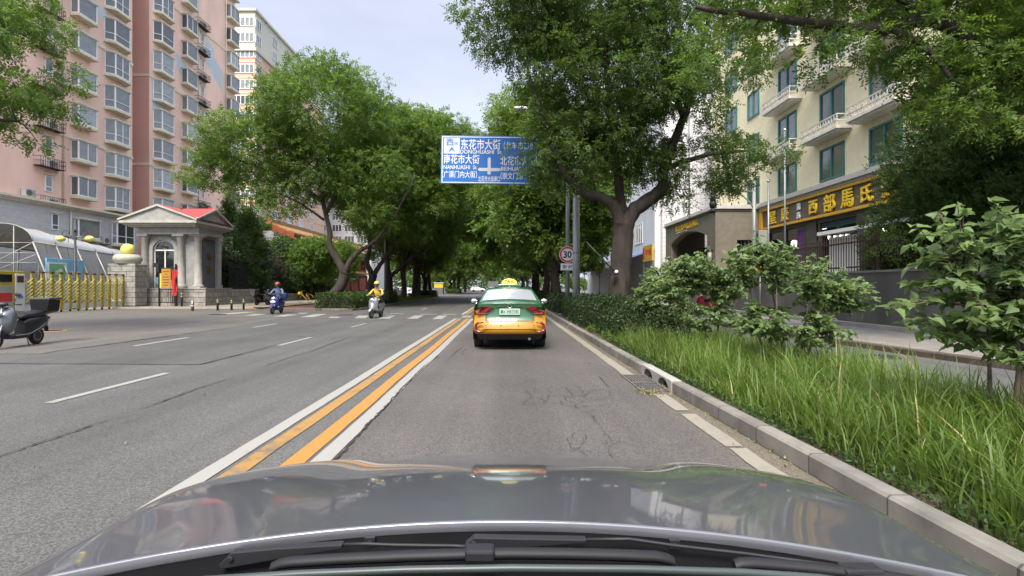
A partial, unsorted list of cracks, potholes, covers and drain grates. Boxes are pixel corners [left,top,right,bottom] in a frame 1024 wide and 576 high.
drain grate [620,364,681,393]
crack [523,362,622,456]
